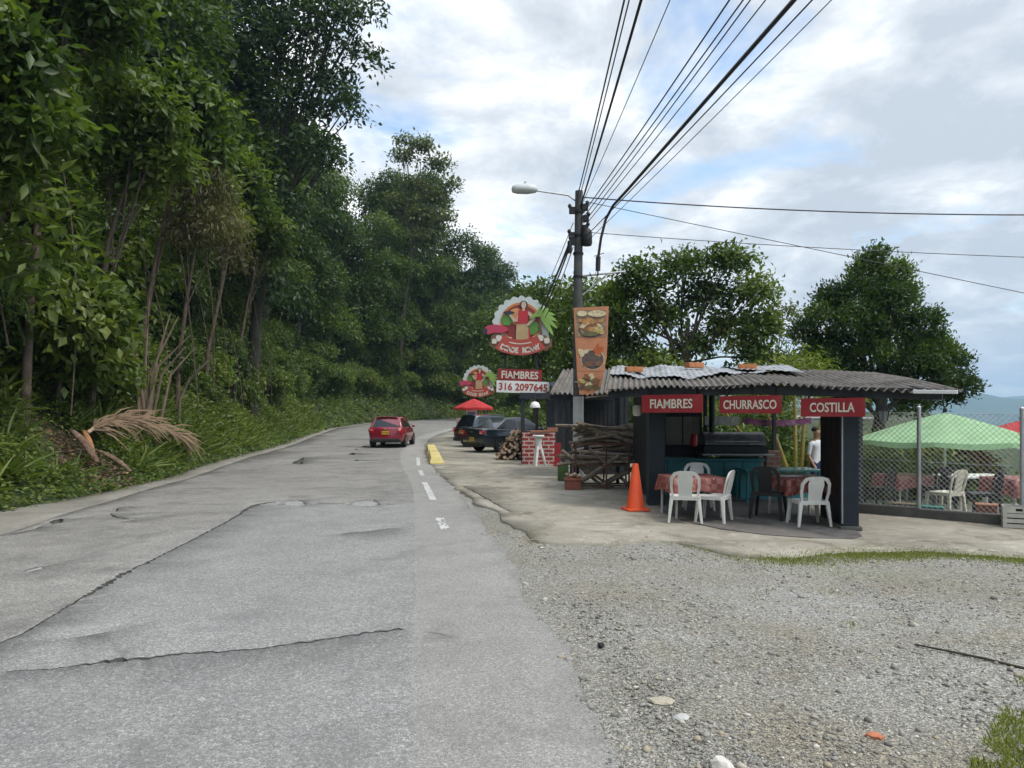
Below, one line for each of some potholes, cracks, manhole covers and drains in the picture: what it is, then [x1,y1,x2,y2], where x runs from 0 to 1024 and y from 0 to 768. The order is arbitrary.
crack [4,628,446,672]
